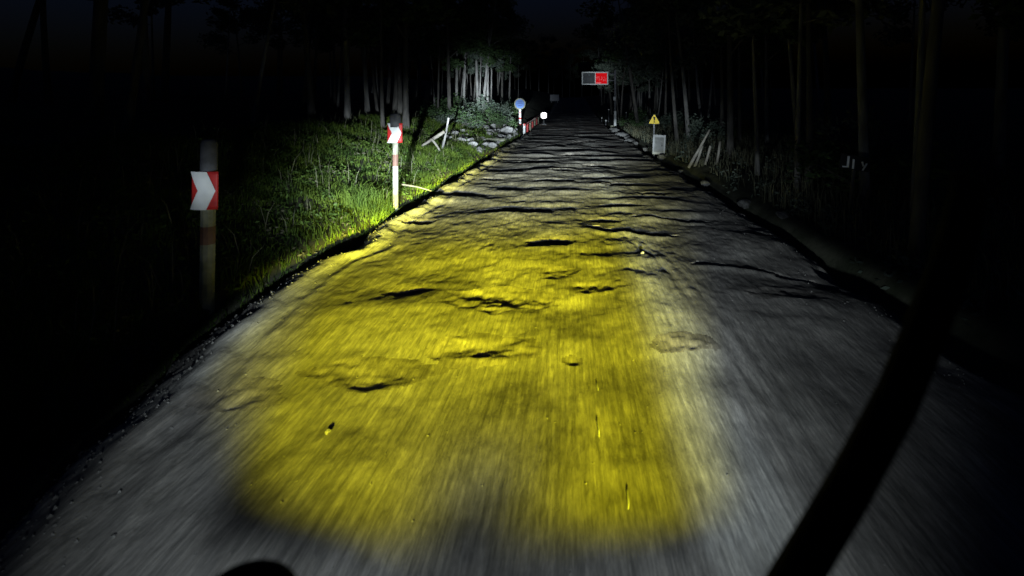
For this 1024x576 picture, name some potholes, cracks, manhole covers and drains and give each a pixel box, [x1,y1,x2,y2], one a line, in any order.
crack [690,261,819,284]
pothole [523,234,577,247]
pothole [564,278,628,296]
pothole [649,331,722,353]
pothole [424,333,542,369]
pothole [295,355,457,393]
pothole [380,283,436,298]
crack [585,214,707,237]
pothole [438,286,561,316]
